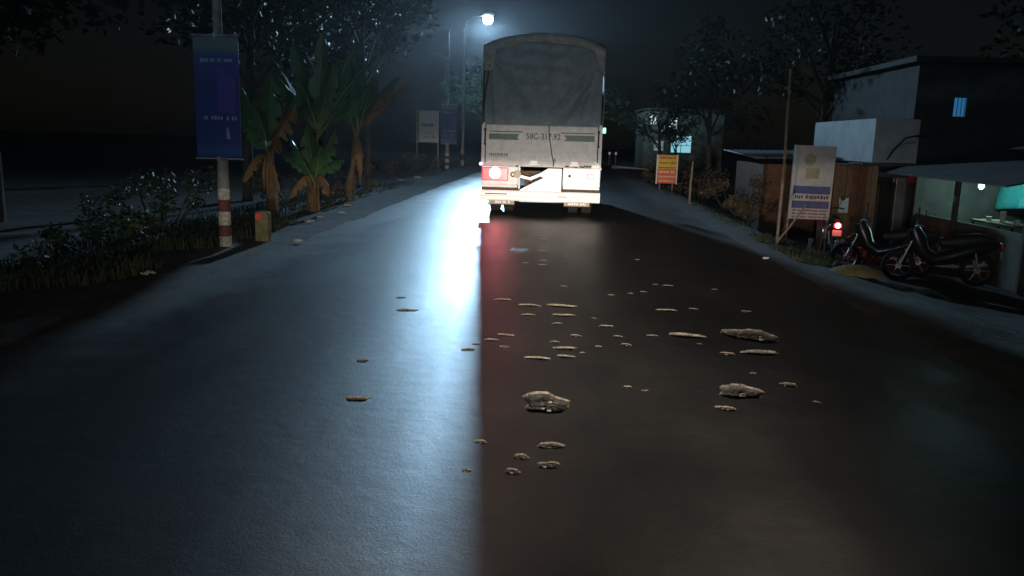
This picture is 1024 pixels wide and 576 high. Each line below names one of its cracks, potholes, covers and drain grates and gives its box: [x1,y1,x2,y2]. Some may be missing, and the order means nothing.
pothole [537,461,560,469]
pothole [522,391,570,414]
pothole [720,329,779,344]
pothole [719,383,765,399]
